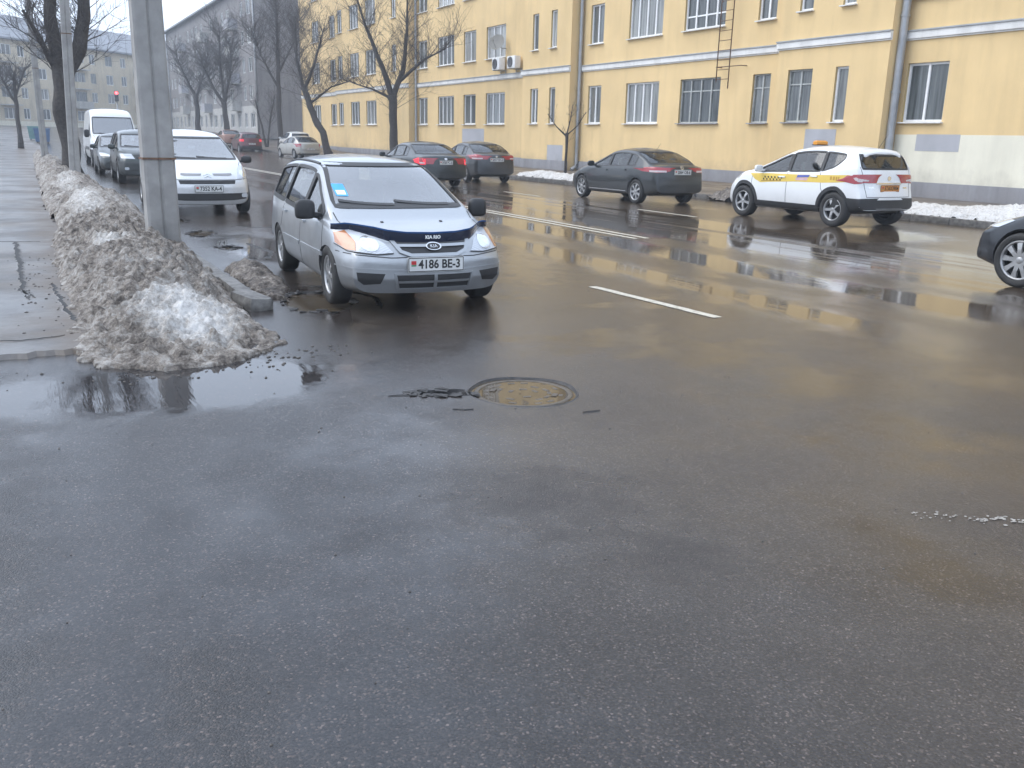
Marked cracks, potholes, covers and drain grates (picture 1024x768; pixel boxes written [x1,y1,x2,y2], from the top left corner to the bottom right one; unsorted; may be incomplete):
manhole cover [466,377,579,407]
pothole [402,387,480,398]
